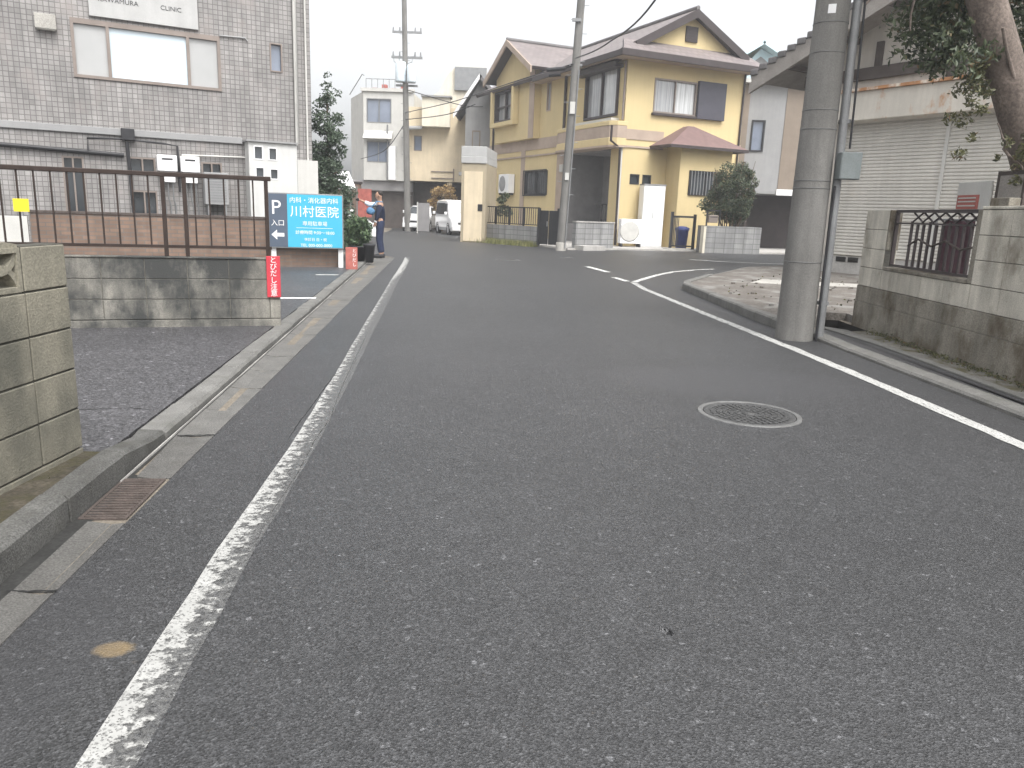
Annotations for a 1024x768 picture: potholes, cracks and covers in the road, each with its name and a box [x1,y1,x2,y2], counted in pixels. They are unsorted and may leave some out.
manhole cover [697,401,803,428]
drain grate [78,478,166,521]
